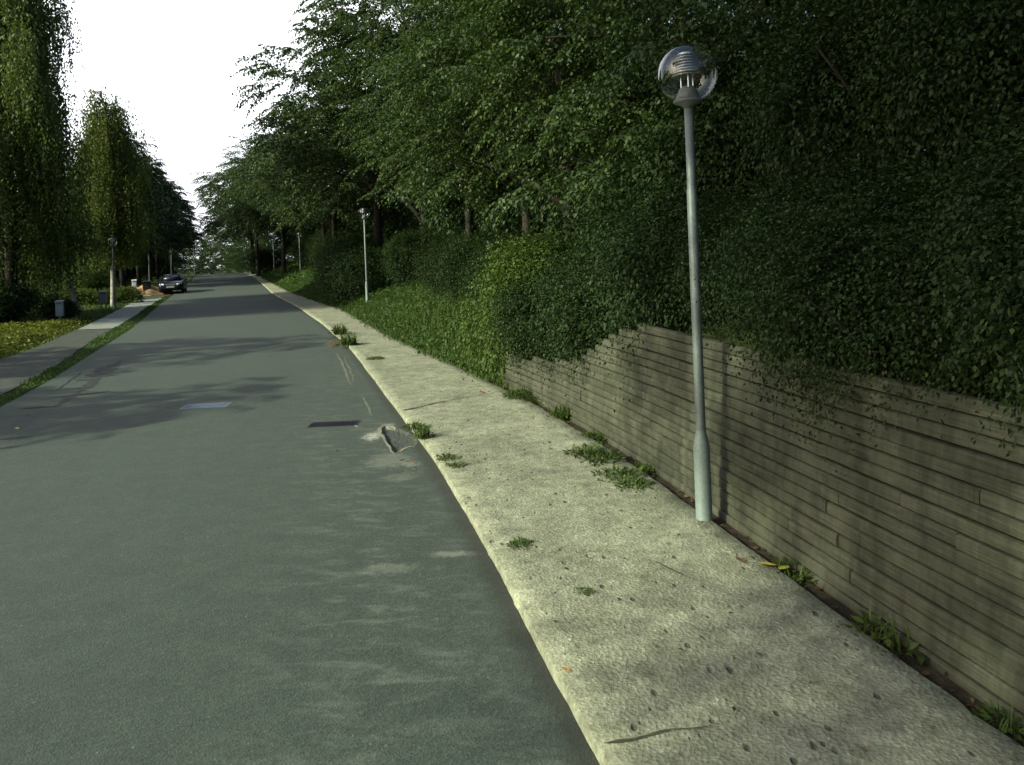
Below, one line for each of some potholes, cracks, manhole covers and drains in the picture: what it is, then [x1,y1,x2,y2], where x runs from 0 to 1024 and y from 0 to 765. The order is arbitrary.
crack [336,353,372,416]
pothole [366,425,418,454]
drain grate [306,420,362,428]
